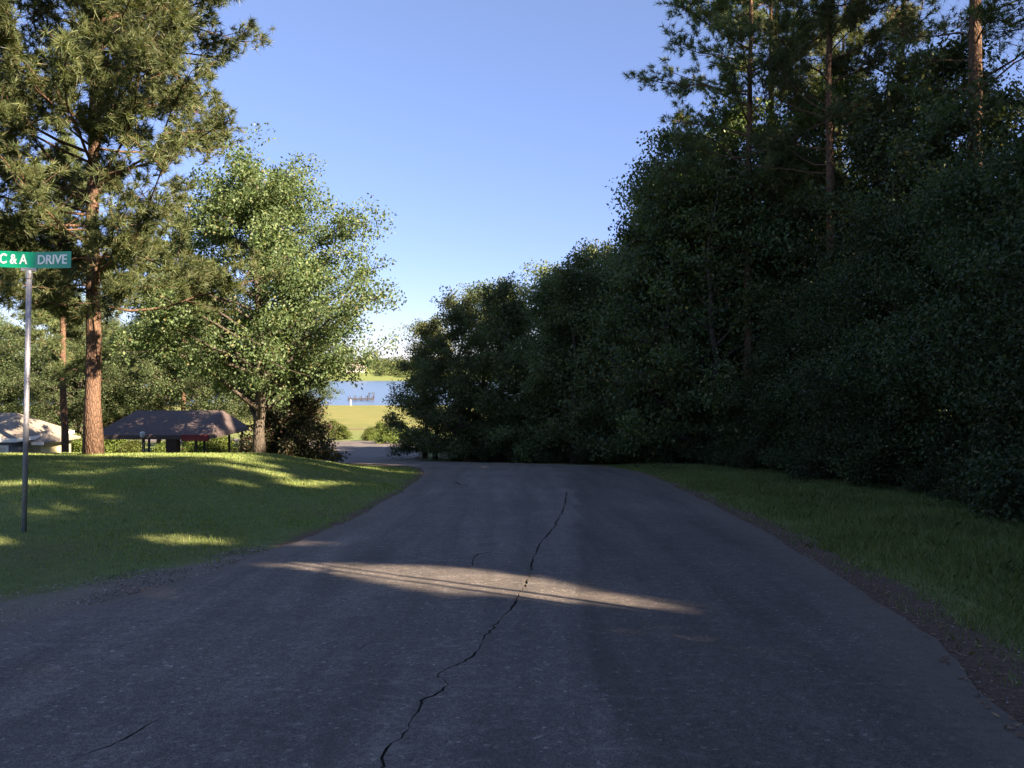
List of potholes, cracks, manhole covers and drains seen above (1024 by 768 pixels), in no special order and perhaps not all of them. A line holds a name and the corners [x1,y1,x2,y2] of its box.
crack [380,493,568,768]
crack [63,715,168,765]
